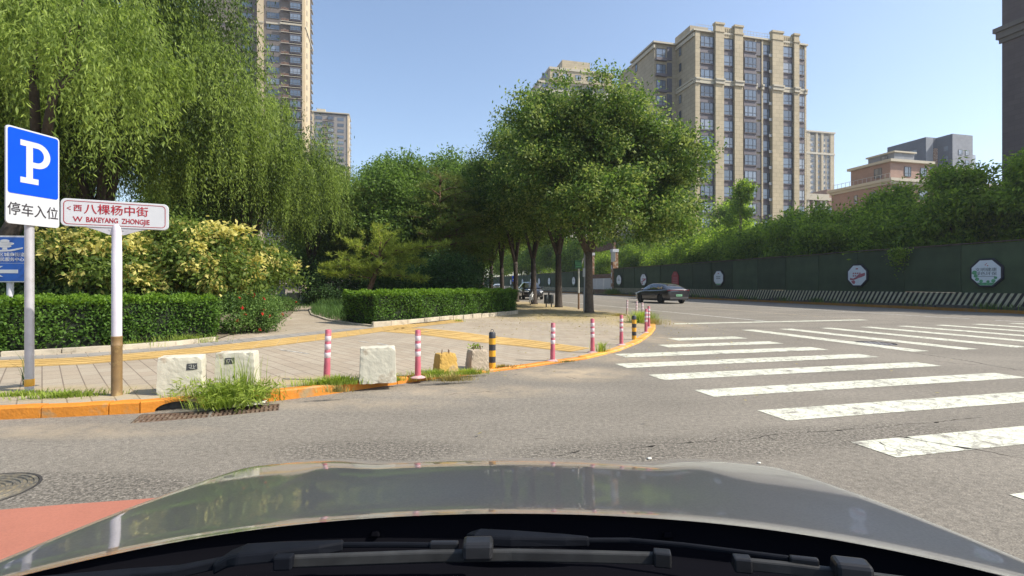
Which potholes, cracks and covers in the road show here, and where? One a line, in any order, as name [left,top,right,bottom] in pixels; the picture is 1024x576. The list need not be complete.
manhole cover [0,472,43,501]
drain grate [210,404,279,417]
drain grate [131,411,210,423]
